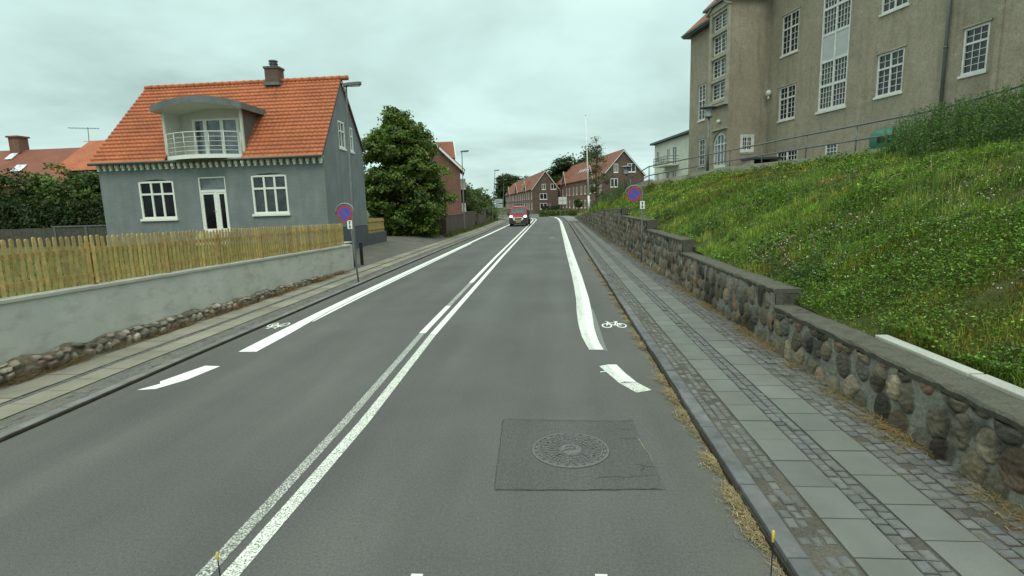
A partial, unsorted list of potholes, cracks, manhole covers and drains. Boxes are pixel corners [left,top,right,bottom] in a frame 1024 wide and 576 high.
manhole cover [532,433,609,469]
